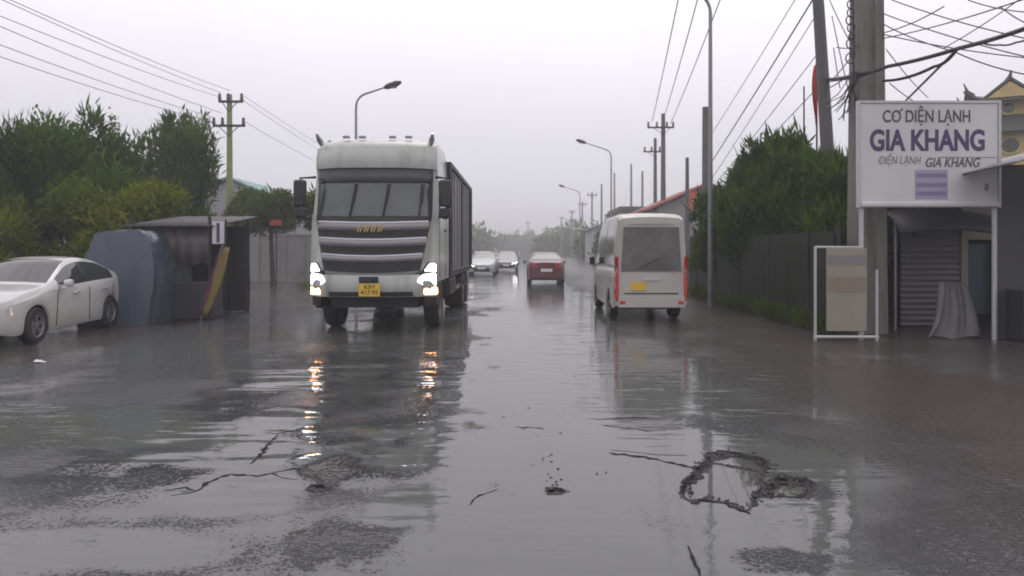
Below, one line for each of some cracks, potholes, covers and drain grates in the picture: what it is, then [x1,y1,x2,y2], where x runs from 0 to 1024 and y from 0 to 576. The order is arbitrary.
crack [610,450,704,469]
crack [164,427,311,496]
pothole [758,473,817,498]
crack [688,546,701,576]
pothole [673,448,778,513]
pothole [305,484,331,492]
